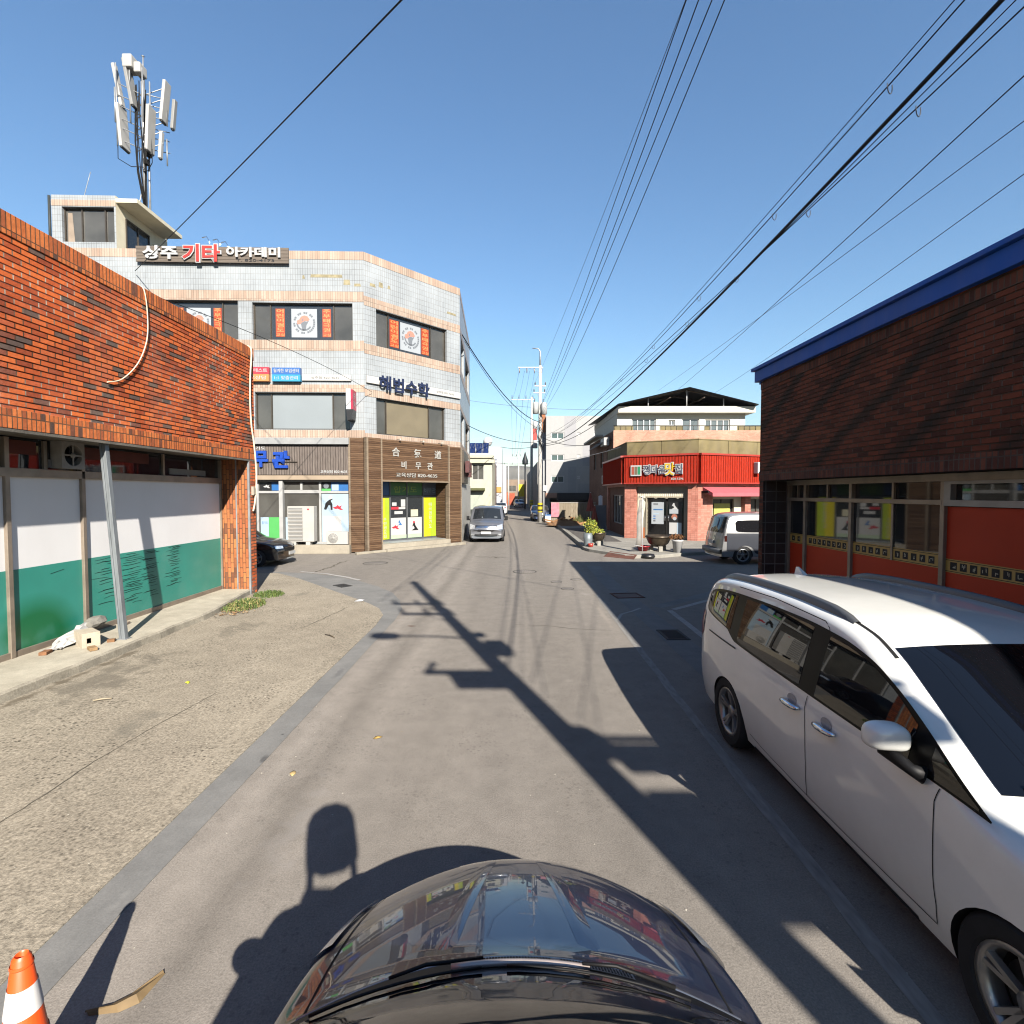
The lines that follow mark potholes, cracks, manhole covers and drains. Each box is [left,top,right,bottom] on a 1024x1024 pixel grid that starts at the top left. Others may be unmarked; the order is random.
drain grate [656,629,691,640]
crack [1,693,215,822]
